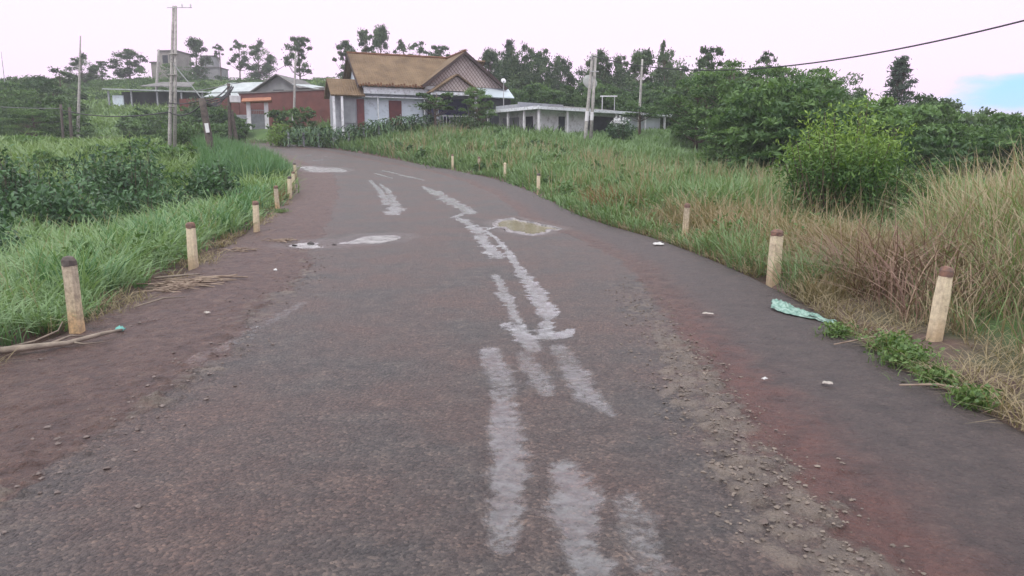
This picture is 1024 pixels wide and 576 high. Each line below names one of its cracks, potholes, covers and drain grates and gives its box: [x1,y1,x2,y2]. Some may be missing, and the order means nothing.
pothole [492,217,562,236]
